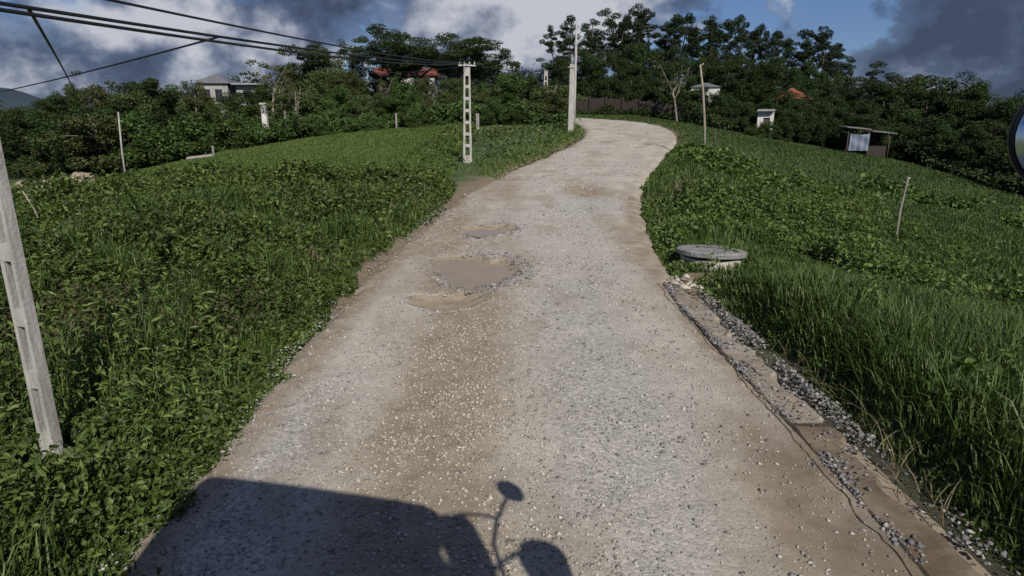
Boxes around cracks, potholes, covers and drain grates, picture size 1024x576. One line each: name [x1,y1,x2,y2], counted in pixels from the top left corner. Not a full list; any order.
pothole [455,222,525,241]
pothole [554,184,621,199]
manhole cover [676,245,747,260]
pothole [413,248,542,297]
pothole [399,290,498,313]
